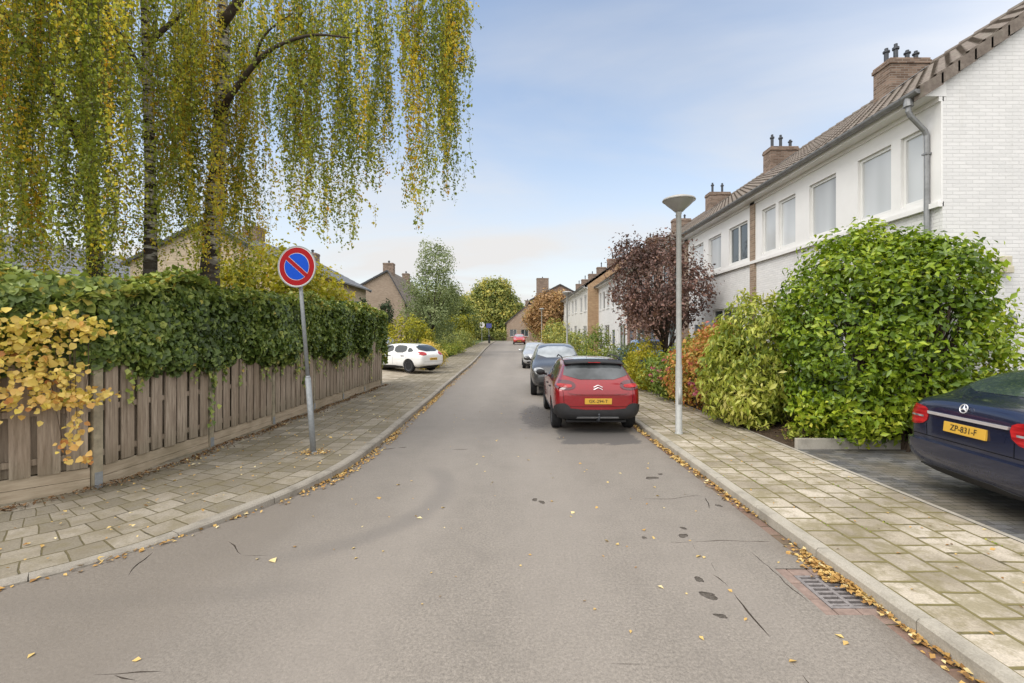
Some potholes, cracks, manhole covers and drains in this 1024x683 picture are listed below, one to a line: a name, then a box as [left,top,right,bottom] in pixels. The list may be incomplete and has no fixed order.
drain grate [775,569,887,616]
crack [98,671,162,680]
crack [694,540,809,683]
